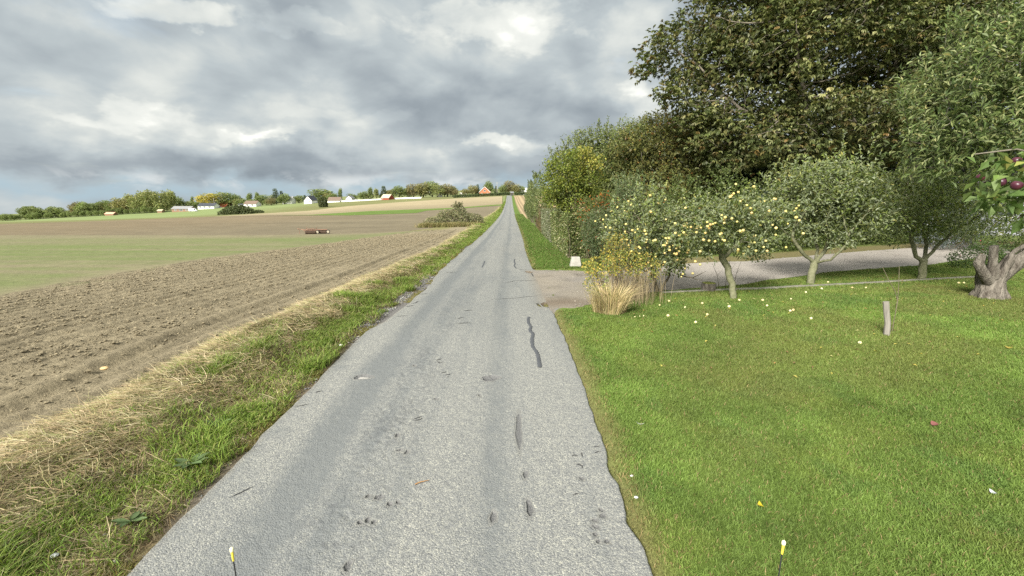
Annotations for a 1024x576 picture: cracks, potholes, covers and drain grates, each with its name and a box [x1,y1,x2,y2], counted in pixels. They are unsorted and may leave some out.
pothole [524,496,536,521]
pothole [514,408,524,460]
pothole [487,509,499,527]
